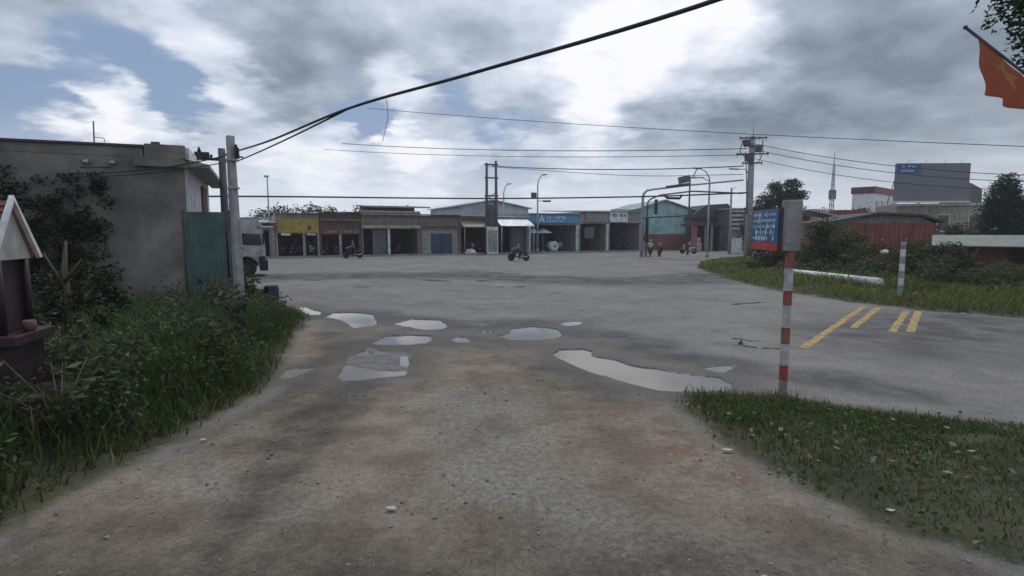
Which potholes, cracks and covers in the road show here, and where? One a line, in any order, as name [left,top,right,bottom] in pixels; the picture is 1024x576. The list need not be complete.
pothole [552,349,733,392]
pothole [373,334,434,345]
pothole [335,348,411,381]
pothole [391,318,448,330]
pothole [497,326,564,340]
pothole [325,312,379,328]
crack [732,338,780,349]
